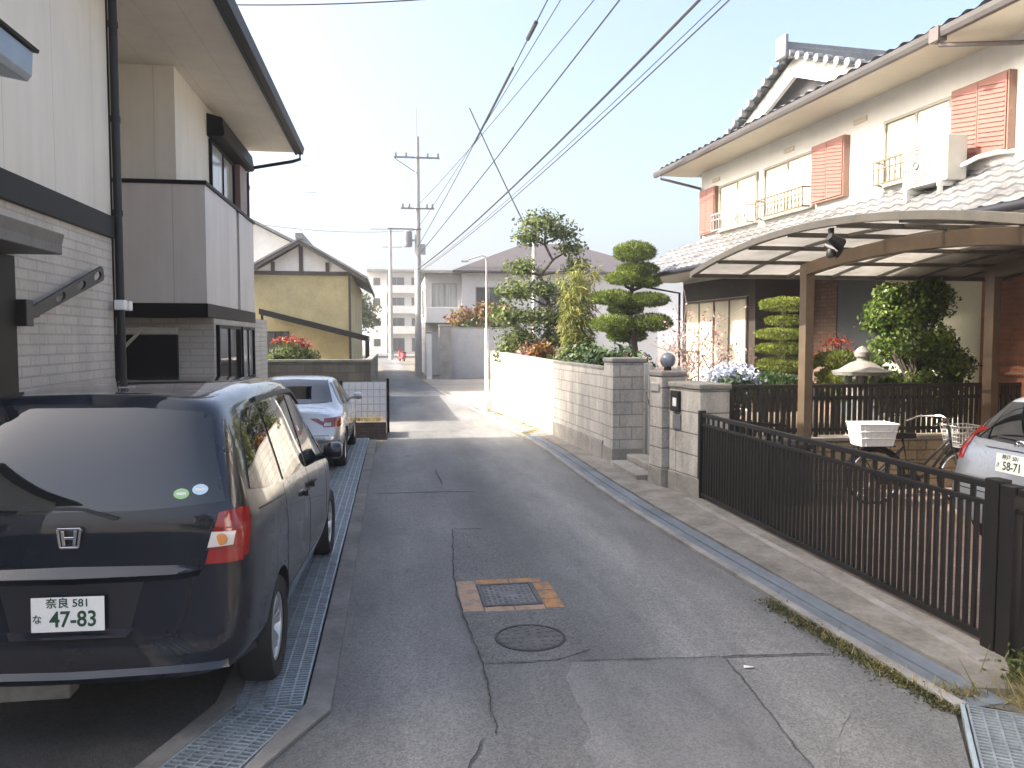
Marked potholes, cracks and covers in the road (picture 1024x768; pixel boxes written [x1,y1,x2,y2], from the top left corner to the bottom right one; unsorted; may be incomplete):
drain grate [347,444,368,452]
crack [583,653,850,768]
drain grate [287,591,331,639]
drain grate [330,481,358,495]
drain grate [335,511,351,532]
drain grate [332,469,361,483]
drain grate [293,557,339,593]
drain grate [311,531,346,559]
drain grate [233,637,320,710]
manhole cover [495,624,566,652]
drain grate [334,494,355,512]
drain grate [337,459,364,470]
